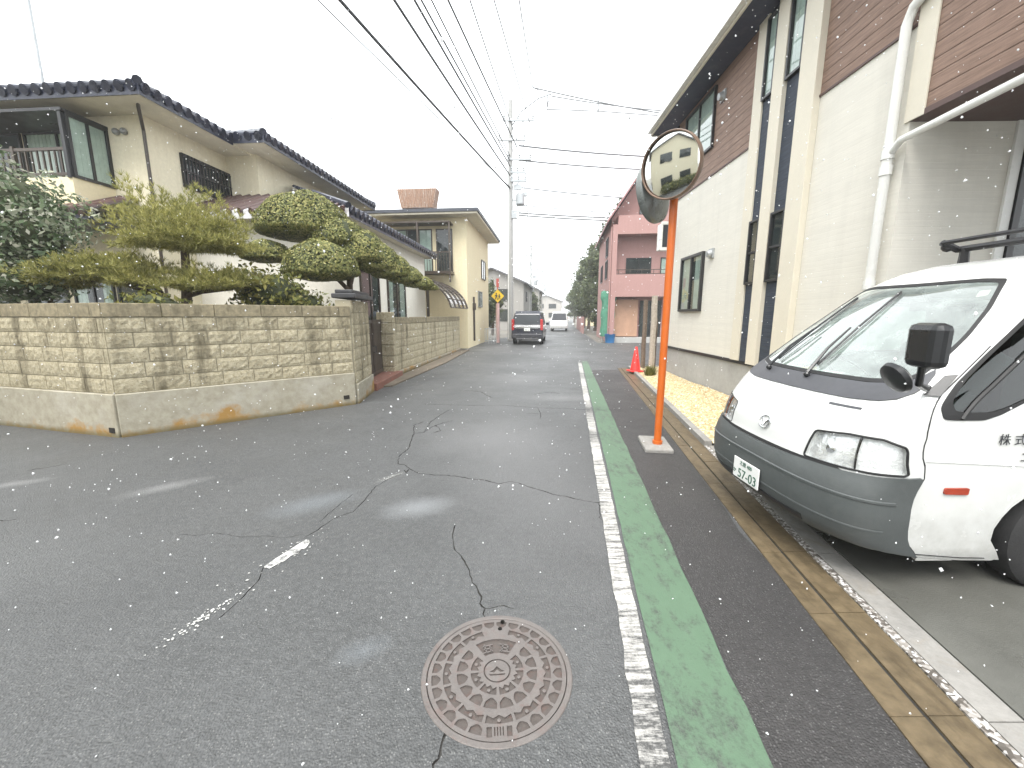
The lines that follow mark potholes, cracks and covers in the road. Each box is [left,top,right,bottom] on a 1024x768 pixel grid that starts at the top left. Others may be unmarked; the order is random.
crack [452,526,514,617]
crack [181,410,601,538]
crack [432,733,446,768]
manhole cover [421,616,573,750]
